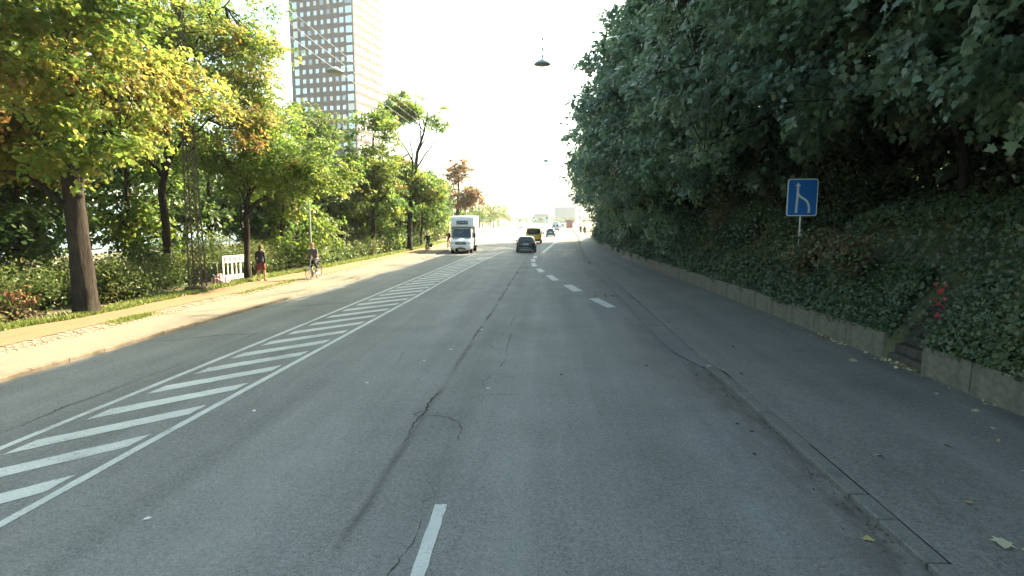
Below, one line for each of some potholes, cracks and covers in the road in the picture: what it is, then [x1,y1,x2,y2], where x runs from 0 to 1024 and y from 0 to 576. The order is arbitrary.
crack [481,315,562,403]
crack [387,484,435,576]
